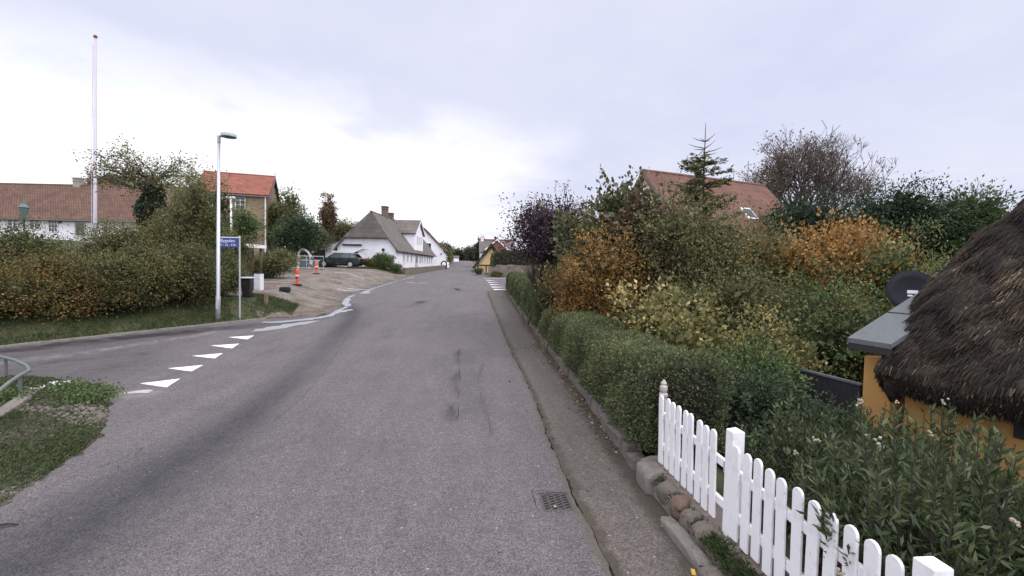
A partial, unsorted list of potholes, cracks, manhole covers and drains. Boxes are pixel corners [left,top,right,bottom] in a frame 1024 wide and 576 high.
drain grate [539,493,574,514]
